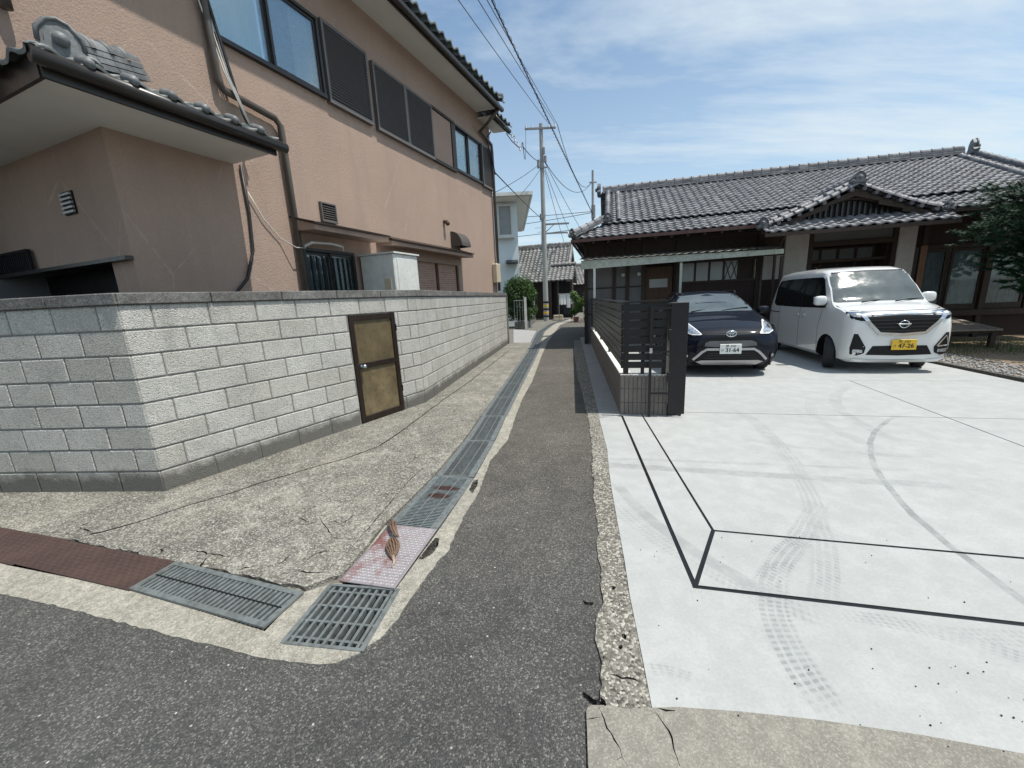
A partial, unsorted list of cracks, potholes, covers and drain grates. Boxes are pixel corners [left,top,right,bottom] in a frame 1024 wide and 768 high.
drain grate [466,416,506,441]
drain grate [505,373,528,383]
drain grate [436,440,495,478]
drain grate [495,383,523,397]
crack [244,448,428,573]
drain grate [387,475,474,532]
drain grate [481,397,516,416]
drain grate [129,561,304,629]
drain grate [280,584,400,653]
drain grate [512,364,532,373]
